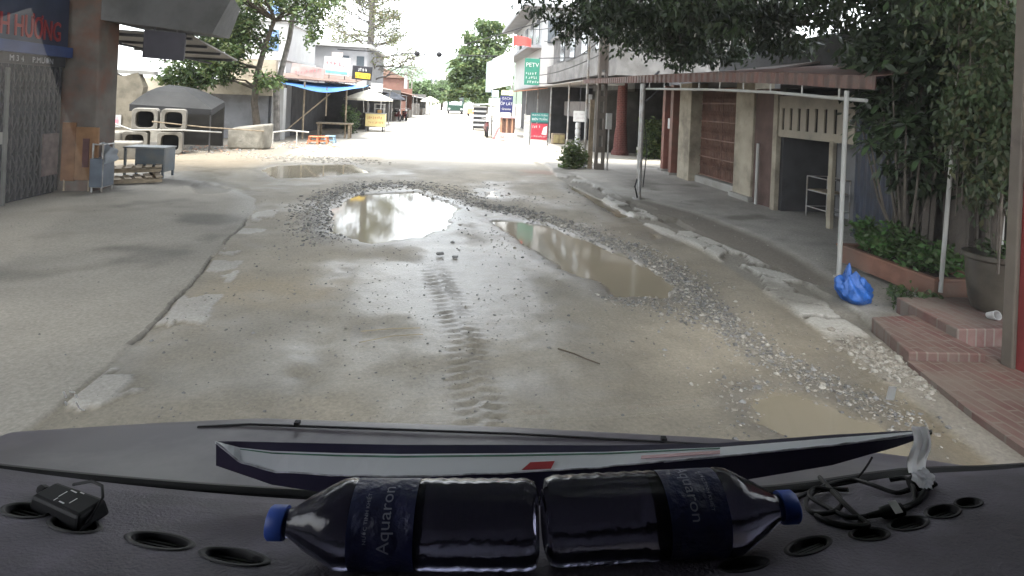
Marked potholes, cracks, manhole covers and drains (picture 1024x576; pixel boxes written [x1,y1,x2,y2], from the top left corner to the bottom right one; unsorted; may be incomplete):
pothole [730,382,940,460]
pothole [488,219,682,301]
pothole [322,190,466,244]
pothole [256,163,374,179]
crack [125,218,248,346]
